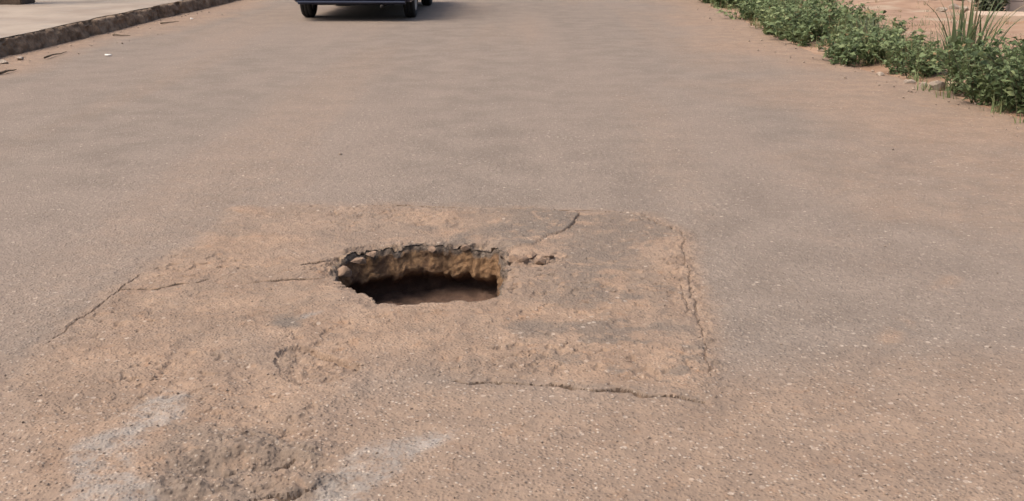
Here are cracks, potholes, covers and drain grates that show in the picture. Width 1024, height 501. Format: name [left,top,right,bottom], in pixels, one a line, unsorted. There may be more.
crack [455,380,705,404]
crack [373,204,635,234]
crack [647,217,712,377]
